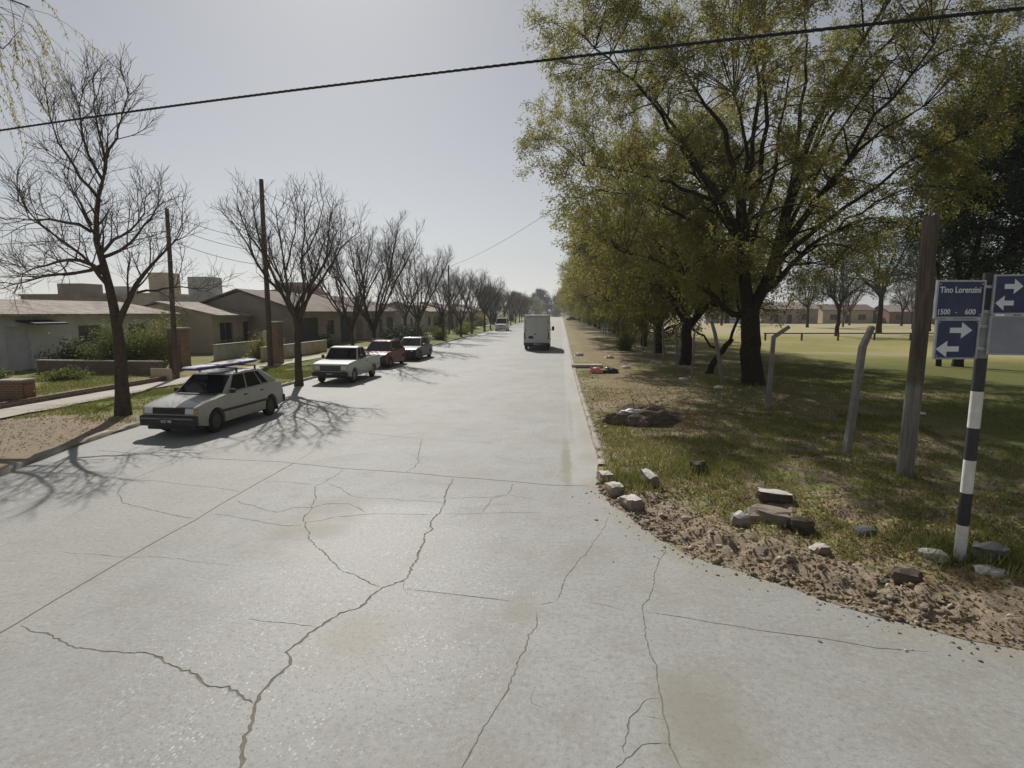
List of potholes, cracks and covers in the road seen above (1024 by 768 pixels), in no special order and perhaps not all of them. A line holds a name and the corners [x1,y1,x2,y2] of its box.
crack [462,519,608,768]
crack [21,460,526,768]
crack [616,545,682,768]
